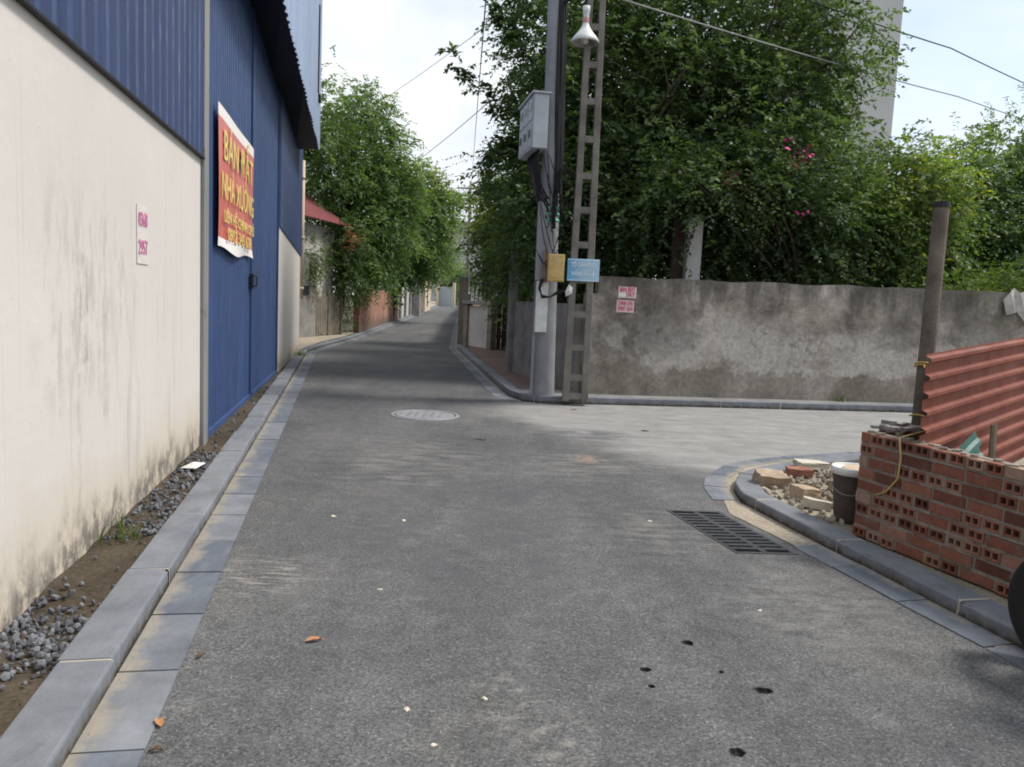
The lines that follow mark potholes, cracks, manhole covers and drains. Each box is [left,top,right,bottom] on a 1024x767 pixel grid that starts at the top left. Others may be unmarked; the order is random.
drain grate [667,510,798,555]
manhole cover [390,410,460,421]
pothole [729,747,747,757]
